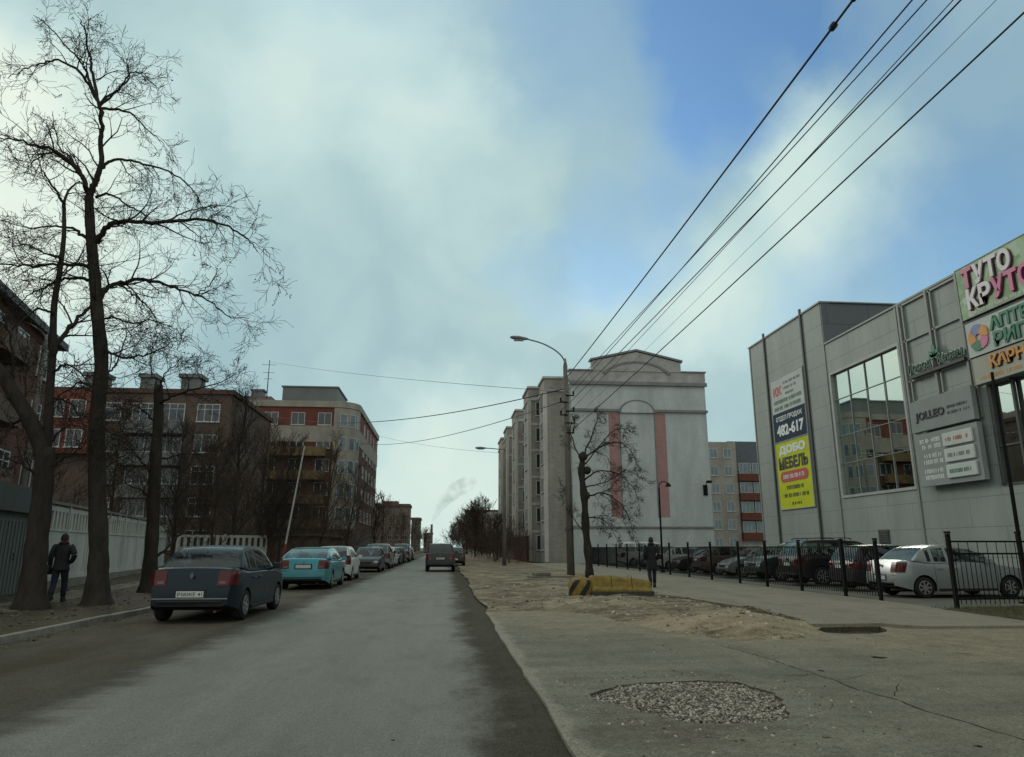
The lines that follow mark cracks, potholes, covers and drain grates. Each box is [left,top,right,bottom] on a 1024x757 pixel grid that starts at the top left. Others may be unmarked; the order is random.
pothole [590,680,790,724]
crack [720,645,1024,740]
